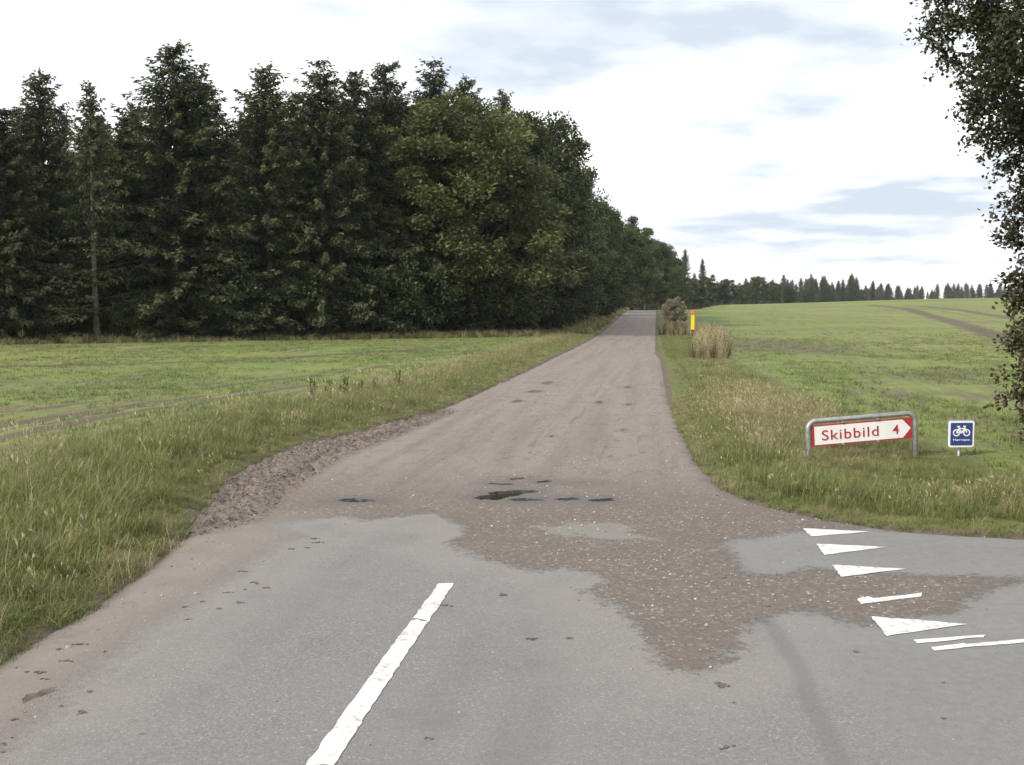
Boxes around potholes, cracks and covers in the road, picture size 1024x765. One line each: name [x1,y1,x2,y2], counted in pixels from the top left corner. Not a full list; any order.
pothole [22,686,58,703]
pothole [474,490,539,500]
